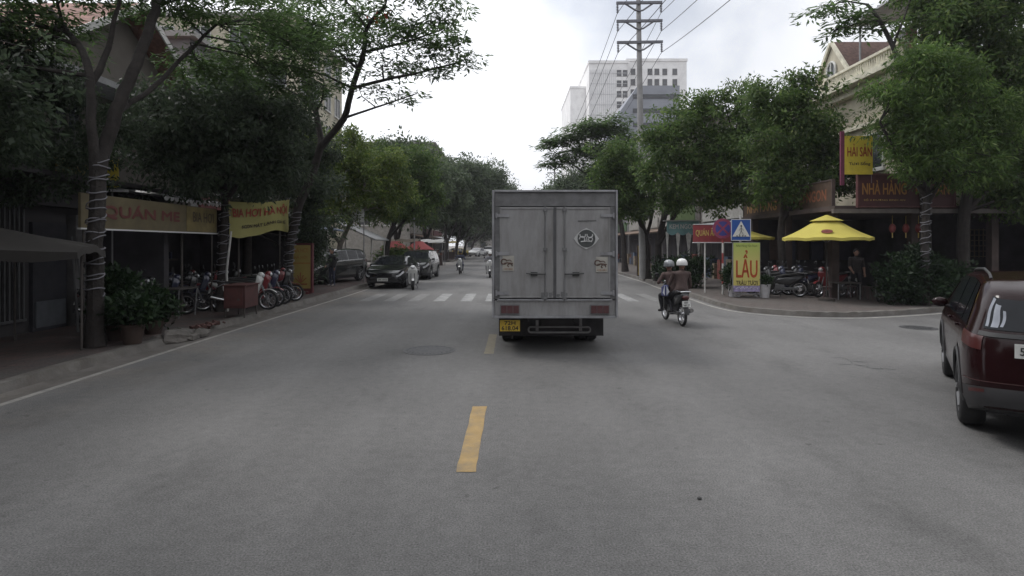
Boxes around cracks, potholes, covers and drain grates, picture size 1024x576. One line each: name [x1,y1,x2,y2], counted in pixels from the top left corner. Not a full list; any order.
manhole cover [403,345,455,355]
